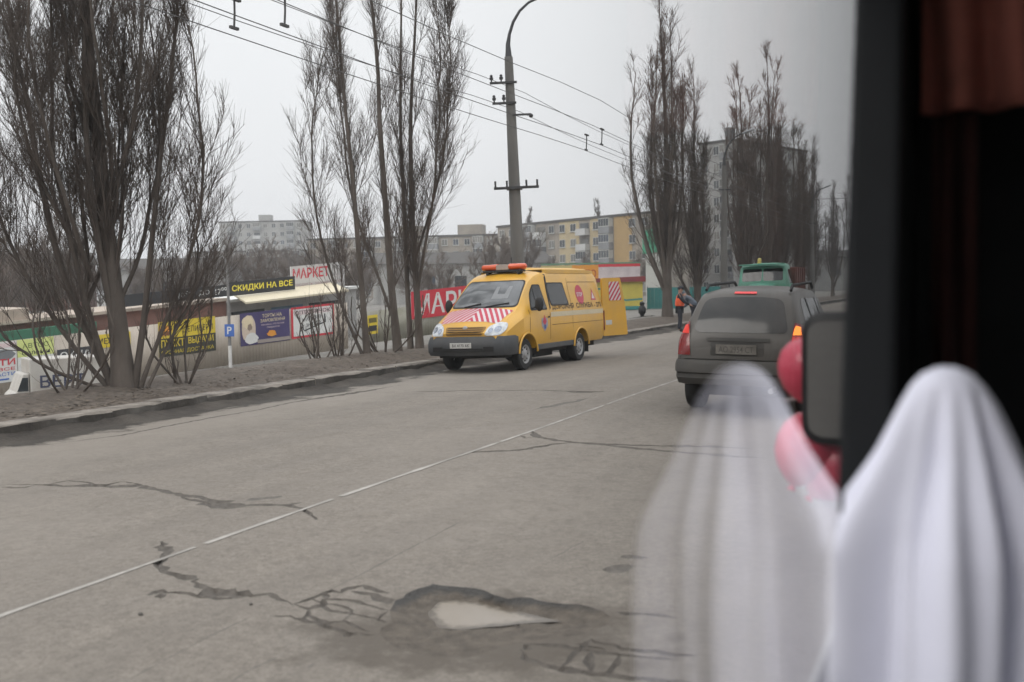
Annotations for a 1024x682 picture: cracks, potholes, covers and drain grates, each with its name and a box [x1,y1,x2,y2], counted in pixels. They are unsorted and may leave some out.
crack [148,541,395,637]
crack [2,480,318,520]
pothole [380,584,610,658]
crack [462,431,762,458]
